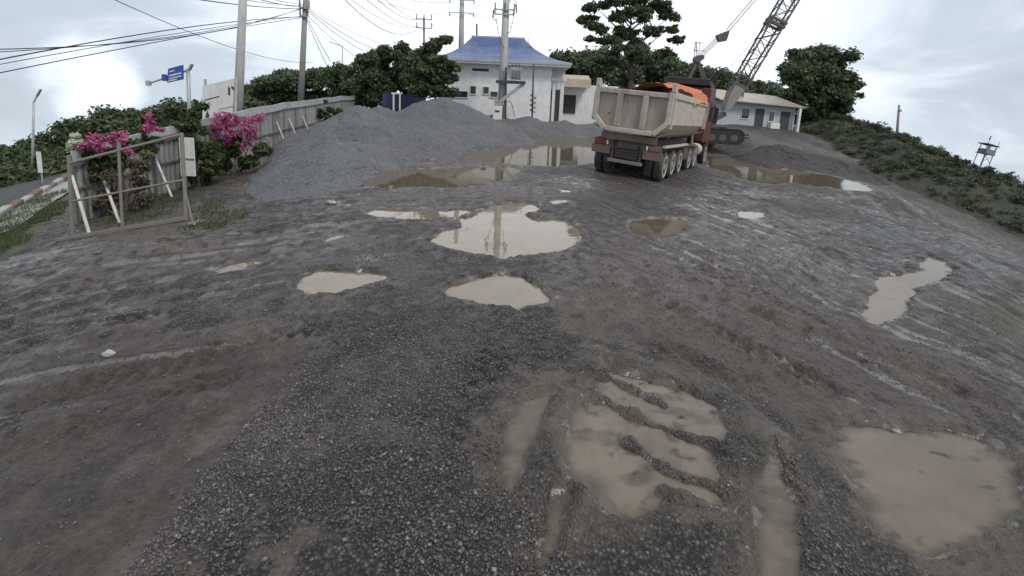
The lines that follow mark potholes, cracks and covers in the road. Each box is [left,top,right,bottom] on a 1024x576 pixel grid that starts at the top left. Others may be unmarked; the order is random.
pothole [776,391,1024,576]
pothole [401,199,605,266]
pothole [500,339,807,576]
pothole [410,263,583,329]
pothole [826,250,982,340]
